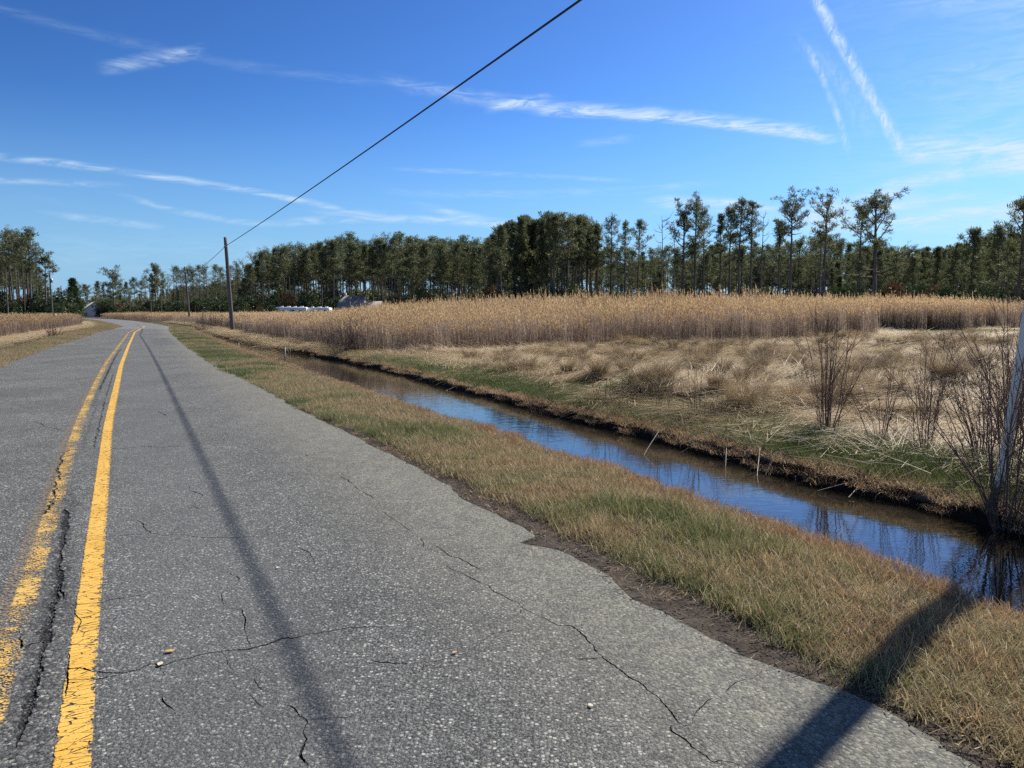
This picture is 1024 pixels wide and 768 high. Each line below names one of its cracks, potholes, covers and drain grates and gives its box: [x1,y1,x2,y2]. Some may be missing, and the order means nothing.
crack [431,543,739,765]
crack [116,487,260,538]
crack [60,573,391,697]
crack [286,705,353,765]
